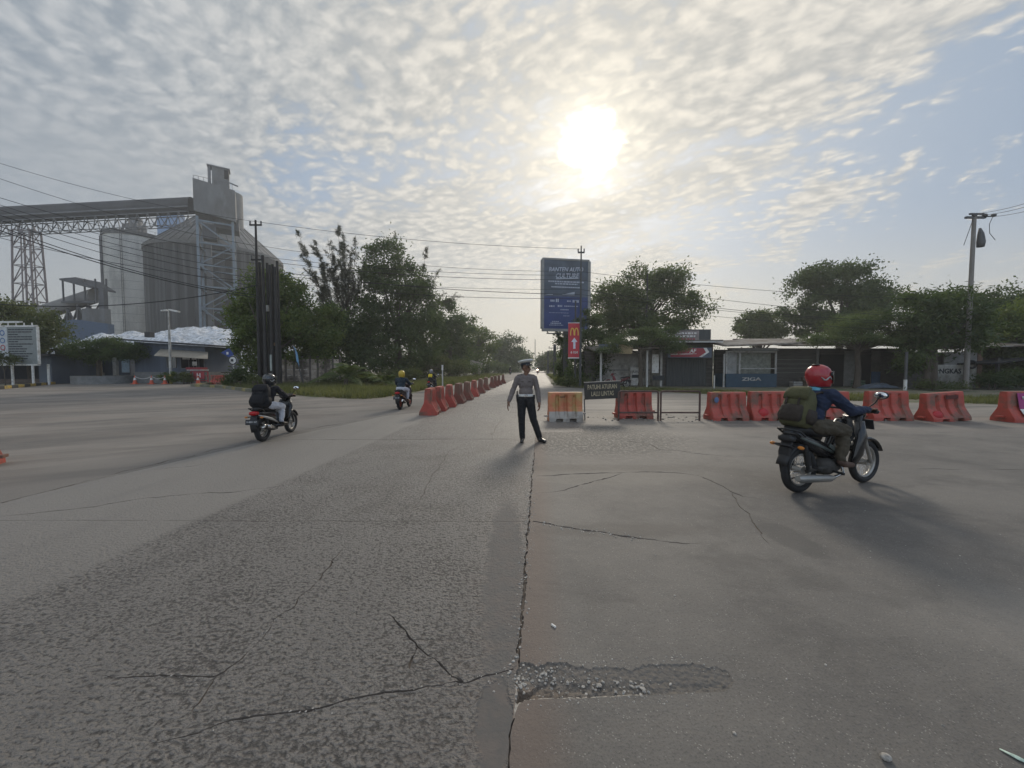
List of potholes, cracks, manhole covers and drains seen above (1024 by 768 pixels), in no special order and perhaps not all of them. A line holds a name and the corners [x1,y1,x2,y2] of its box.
crack [105,544,514,743]
pothole [513,662,735,719]
crack [542,472,768,543]
